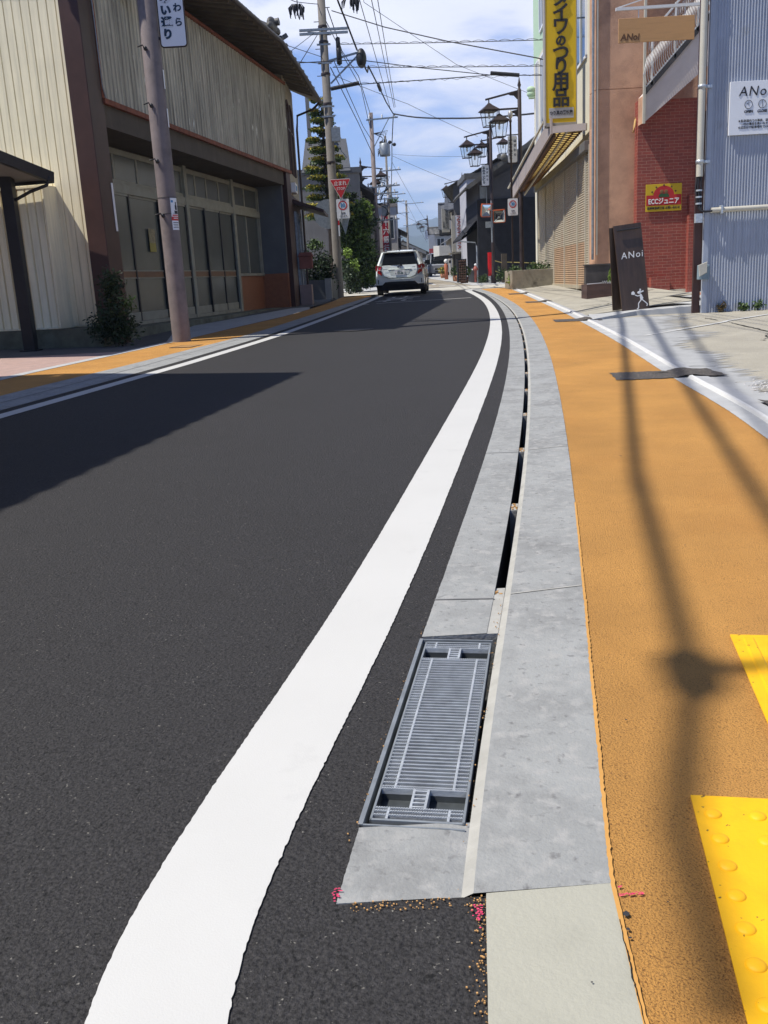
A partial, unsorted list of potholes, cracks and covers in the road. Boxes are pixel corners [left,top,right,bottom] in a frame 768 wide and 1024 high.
drain grate [358,638,493,832]
